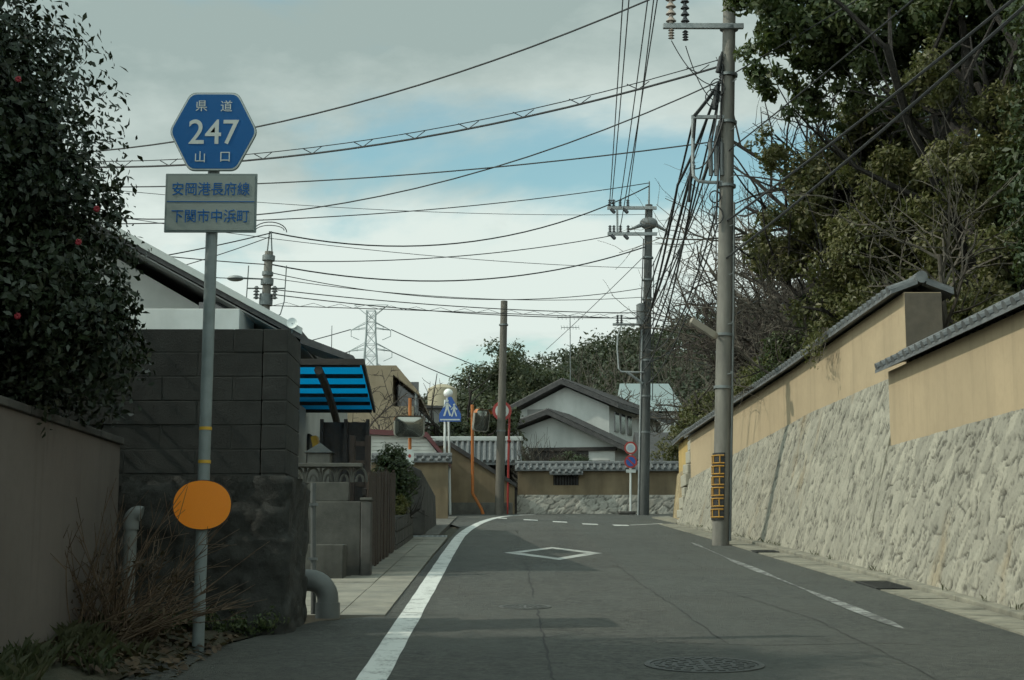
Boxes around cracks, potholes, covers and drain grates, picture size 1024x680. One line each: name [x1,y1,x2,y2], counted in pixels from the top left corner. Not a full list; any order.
drain grate [856,581,912,590]
manhole cover [644,656,765,673]
crack [527,568,556,680]
